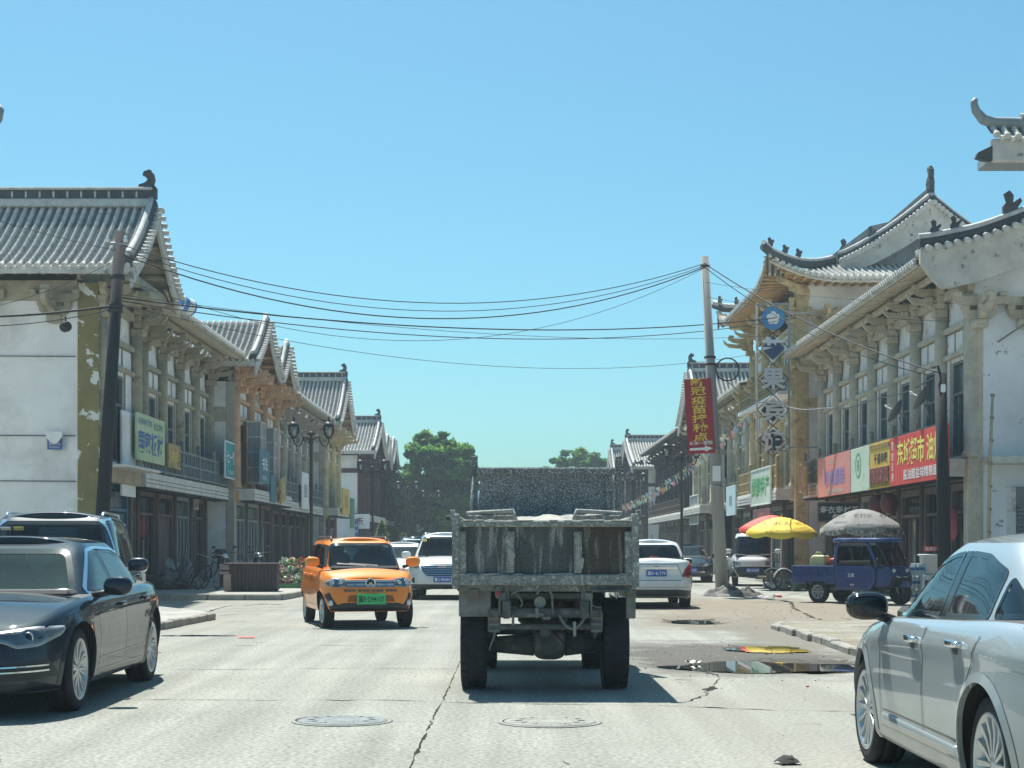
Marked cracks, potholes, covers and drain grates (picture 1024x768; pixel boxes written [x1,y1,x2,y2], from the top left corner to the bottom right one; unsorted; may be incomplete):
crack [676,671,719,702]
manhole cover [498,716,602,728]
manhole cover [291,715,393,726]
pothole [666,658,854,674]
